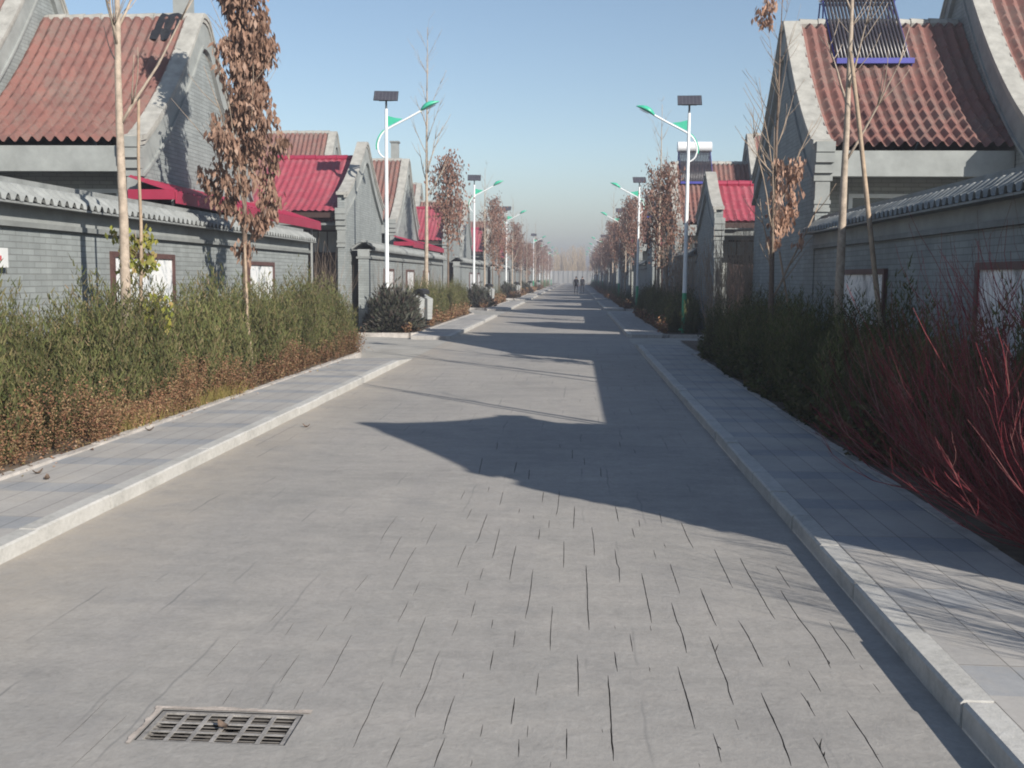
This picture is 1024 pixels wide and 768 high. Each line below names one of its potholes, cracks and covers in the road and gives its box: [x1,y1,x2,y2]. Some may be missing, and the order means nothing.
crack [847,711,883,767]
crack [353,683,383,747]
crack [586,531,595,626]
drain grate [125,706,312,746]
crack [602,626,650,761]
crack [654,544,862,767]
crack [380,443,575,766]
